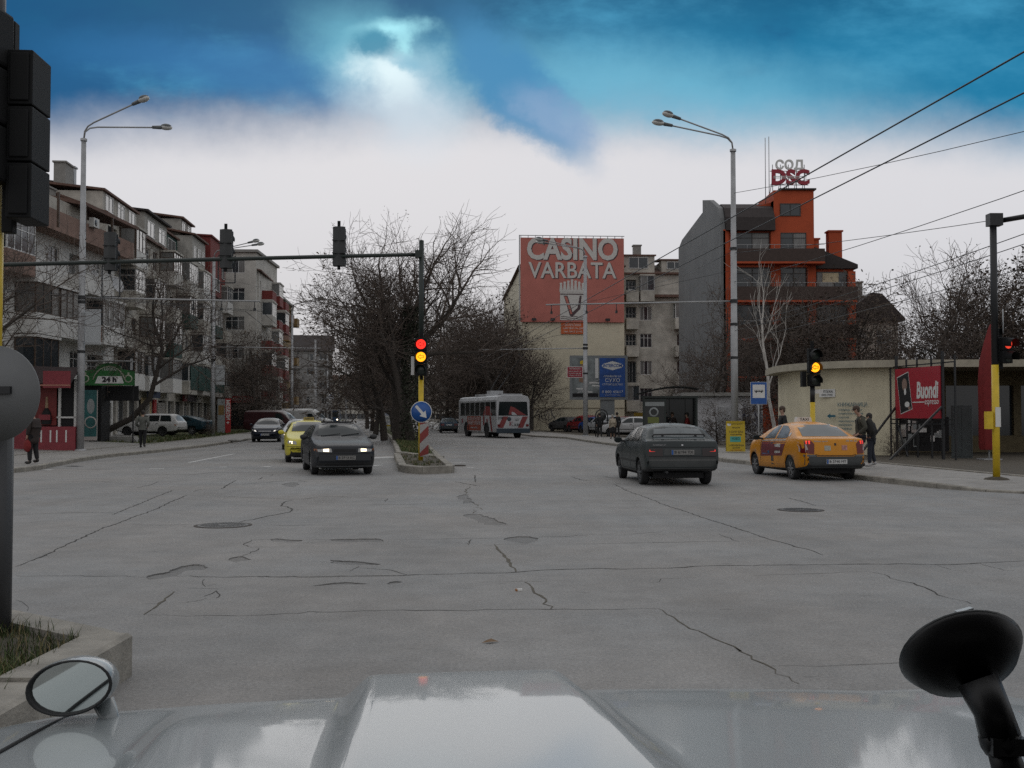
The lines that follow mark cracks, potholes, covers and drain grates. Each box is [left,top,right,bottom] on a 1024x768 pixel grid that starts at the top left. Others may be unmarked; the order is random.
pothole [146,564,208,580]
crack [179,581,1022,684]
crack [564,476,822,555]
crack [18,472,332,566]
crack [80,561,1014,599]
pothole [463,514,506,525]
pothole [503,536,539,544]
